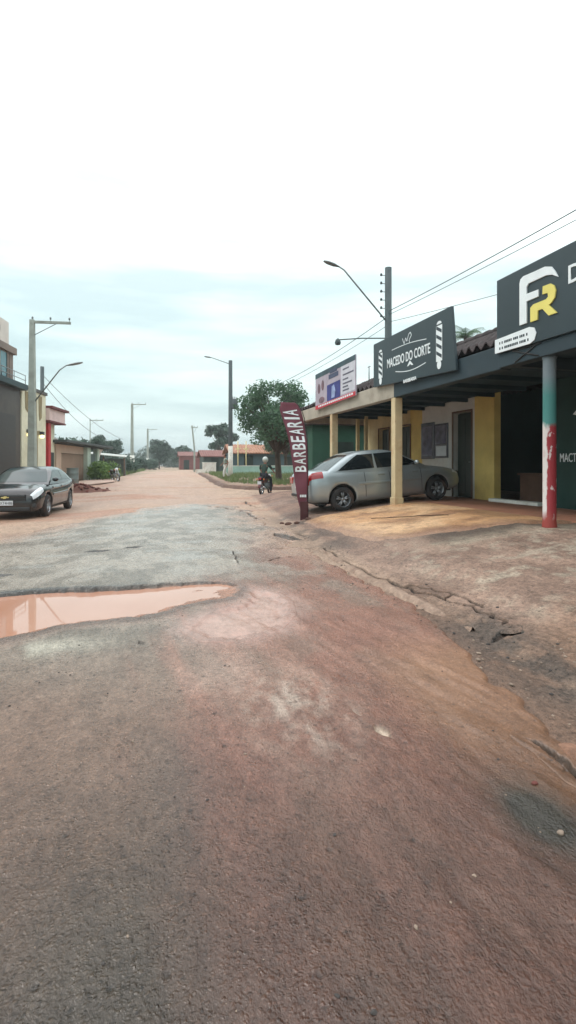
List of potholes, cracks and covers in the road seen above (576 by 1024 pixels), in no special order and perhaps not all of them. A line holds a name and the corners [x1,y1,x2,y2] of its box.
crack [229,551,244,565]
pothole [0,580,247,642]
crack [264,547,522,634]
